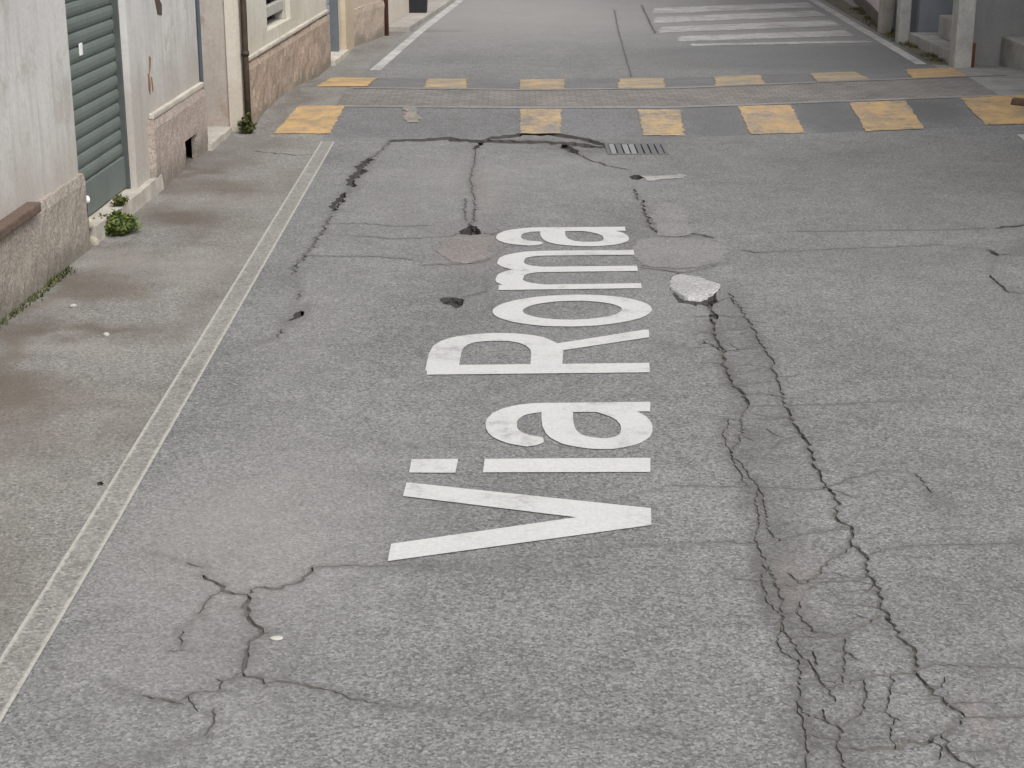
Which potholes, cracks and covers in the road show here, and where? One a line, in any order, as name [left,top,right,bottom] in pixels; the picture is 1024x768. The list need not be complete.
crack [633,189,713,238]
crack [743,224,1024,253]
pothole [439,297,464,309]
crack [289,132,627,275]
pothole [458,225,482,235]
pothole [669,273,721,308]
crack [141,563,384,736]
drain grate [604,143,669,155]
crack [673,276,1024,768]
